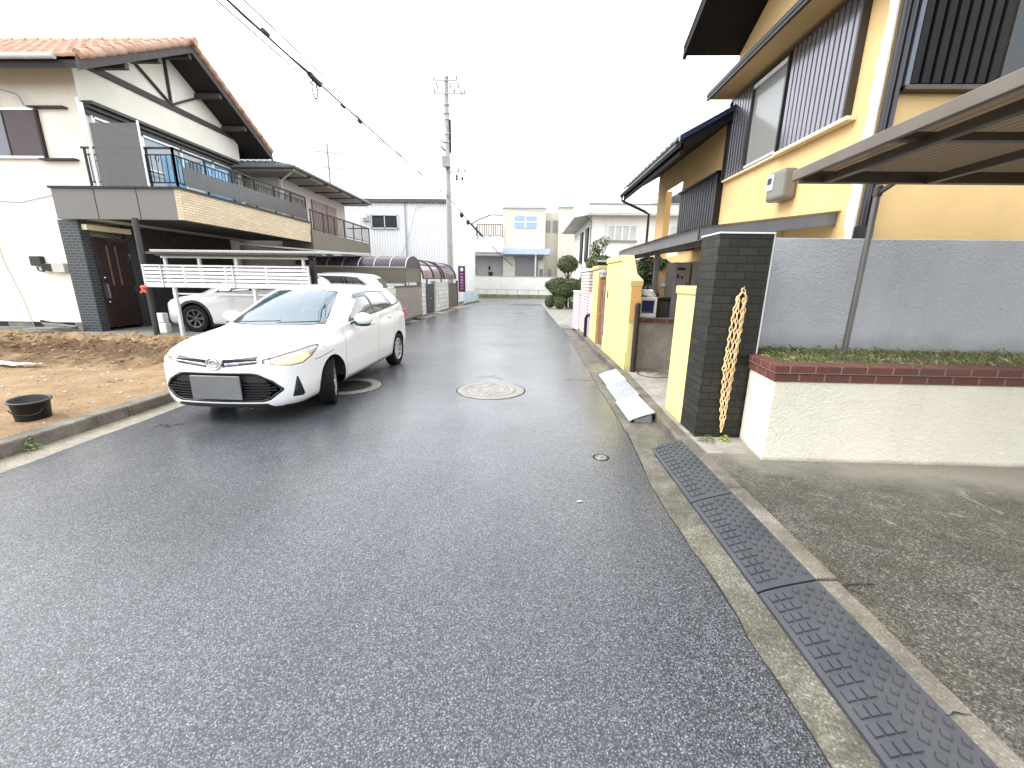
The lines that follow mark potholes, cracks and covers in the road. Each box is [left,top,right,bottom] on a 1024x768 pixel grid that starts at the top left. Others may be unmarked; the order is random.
manhole cover [318,378,383,395]
manhole cover [456,382,526,400]
